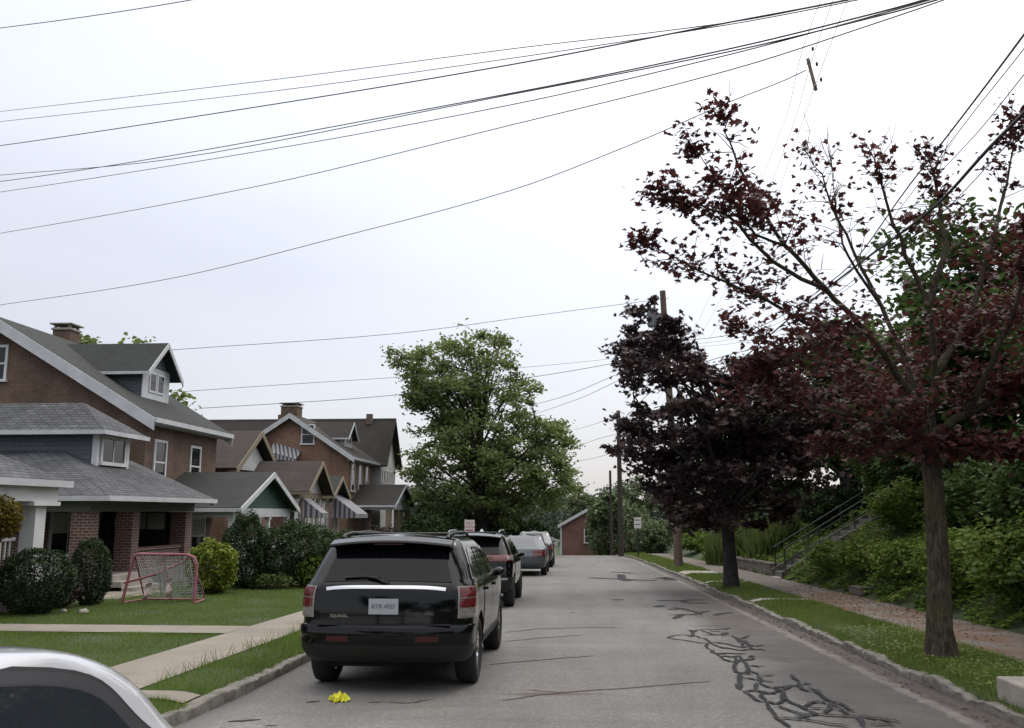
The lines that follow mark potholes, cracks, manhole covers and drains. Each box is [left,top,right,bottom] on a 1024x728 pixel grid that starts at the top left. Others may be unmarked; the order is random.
crack [495,655,595,664]
crack [501,681,708,701]
crack [510,627,599,641]
